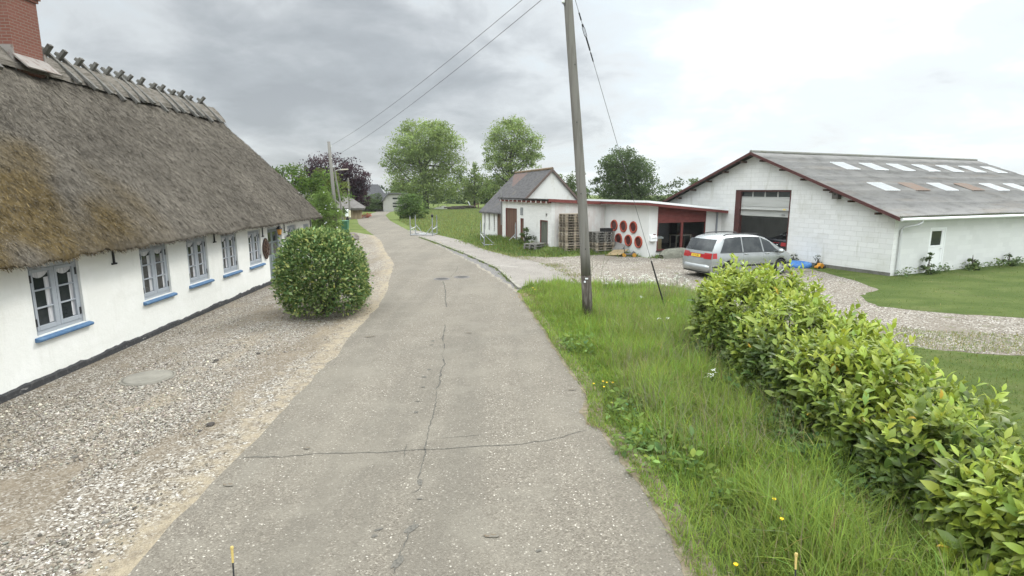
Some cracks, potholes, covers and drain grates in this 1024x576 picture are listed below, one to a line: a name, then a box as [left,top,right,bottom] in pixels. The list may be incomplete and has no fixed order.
crack [243,430,585,458]
manhole cover [119,370,176,386]
